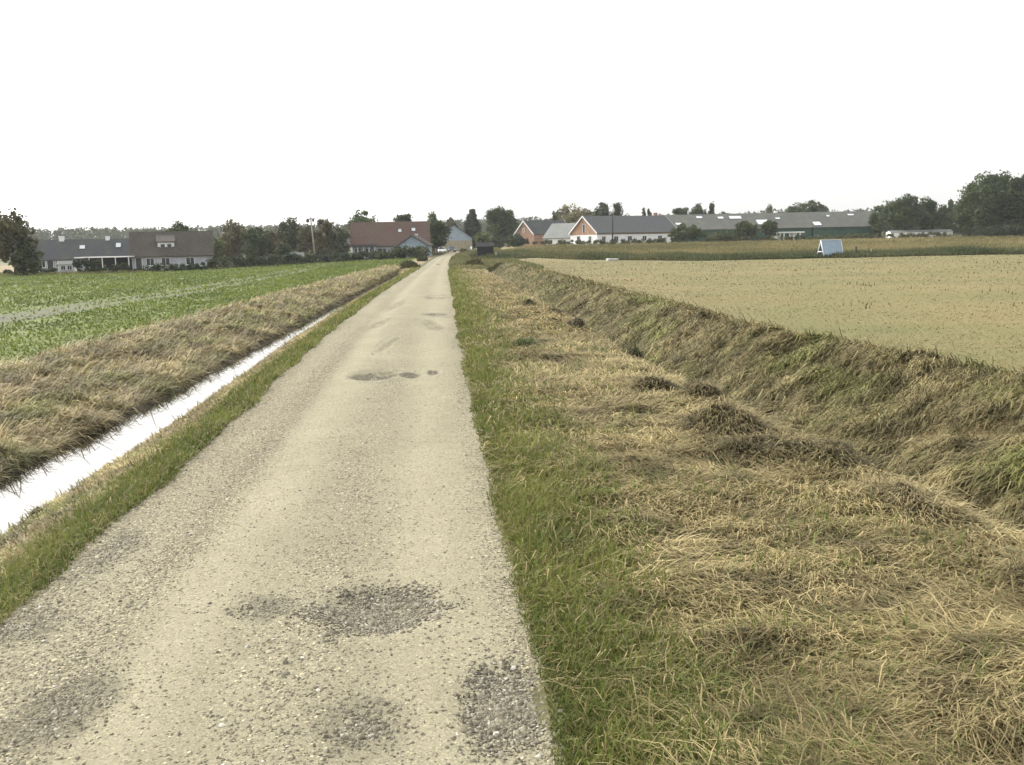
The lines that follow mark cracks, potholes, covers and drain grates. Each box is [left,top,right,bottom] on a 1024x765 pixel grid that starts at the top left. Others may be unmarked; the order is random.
pothole [331,372,407,381]
